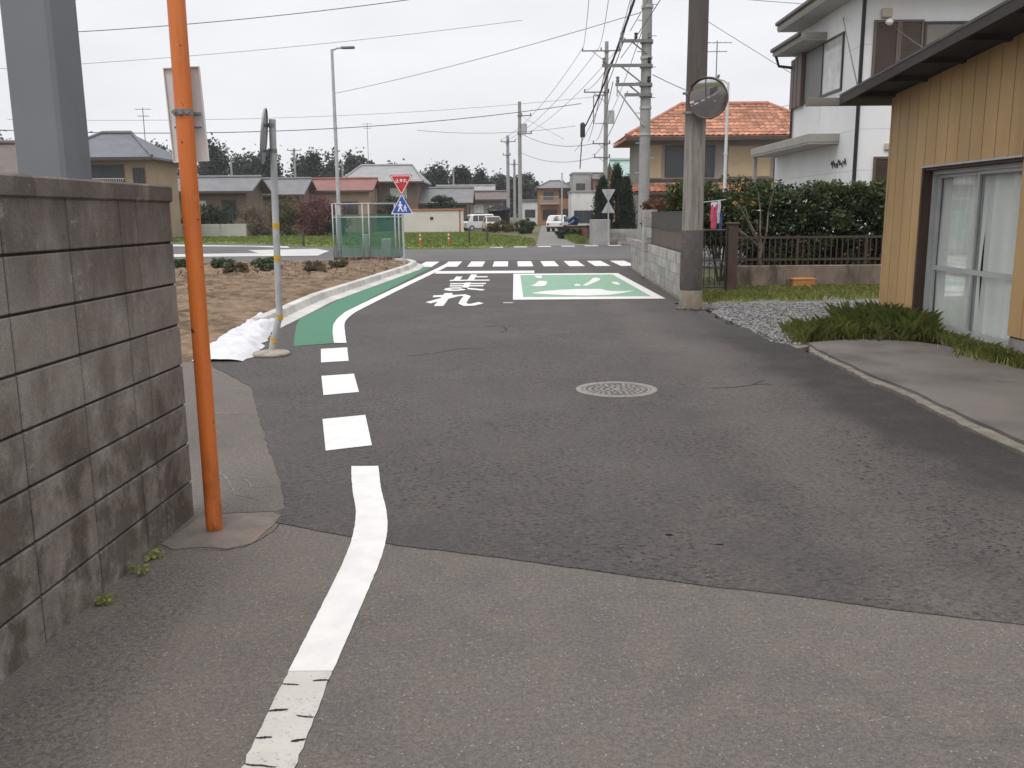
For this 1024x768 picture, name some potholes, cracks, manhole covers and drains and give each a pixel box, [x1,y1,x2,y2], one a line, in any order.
manhole cover [576,381,657,397]
crack [195,472,280,551]
